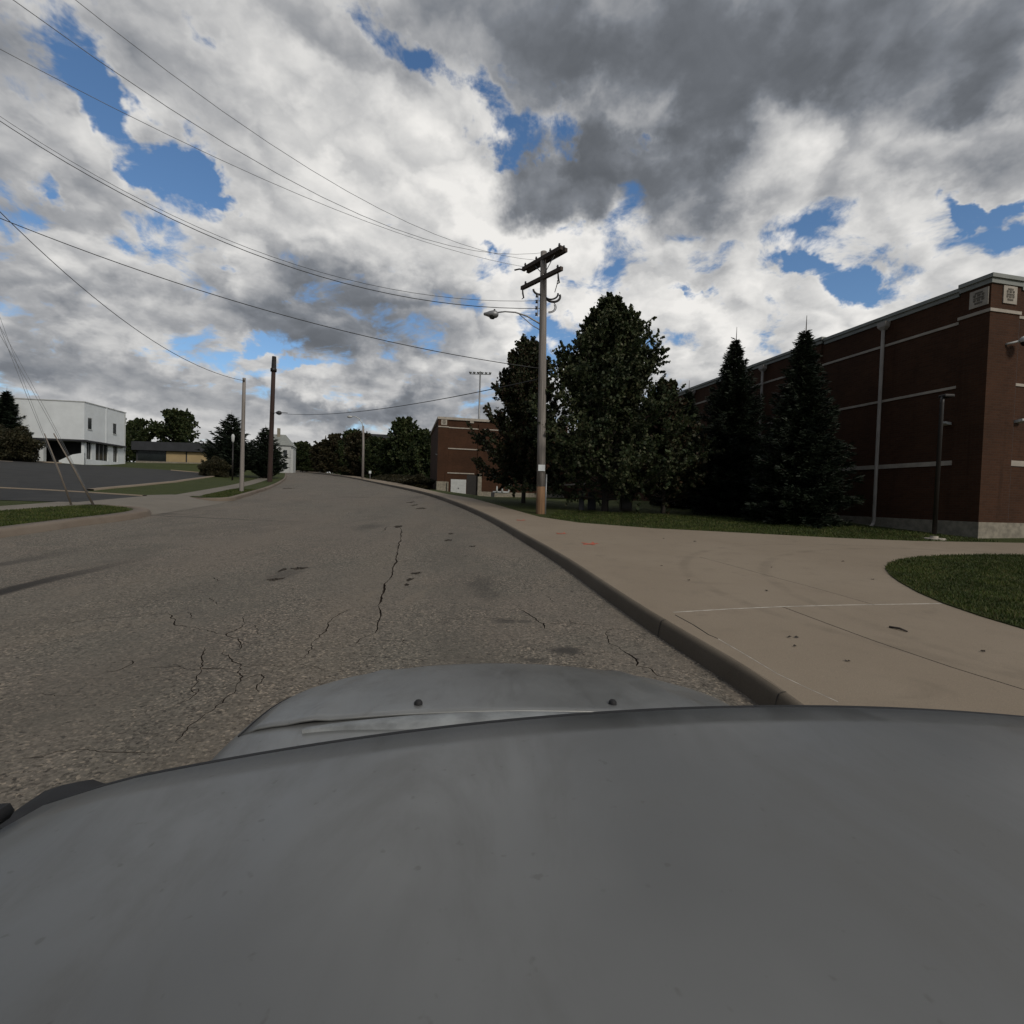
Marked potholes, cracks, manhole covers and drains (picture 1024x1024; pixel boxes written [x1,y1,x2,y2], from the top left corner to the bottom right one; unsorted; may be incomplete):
crack [73,612,293,742]
crack [295,606,374,667]
crack [452,586,676,680]
